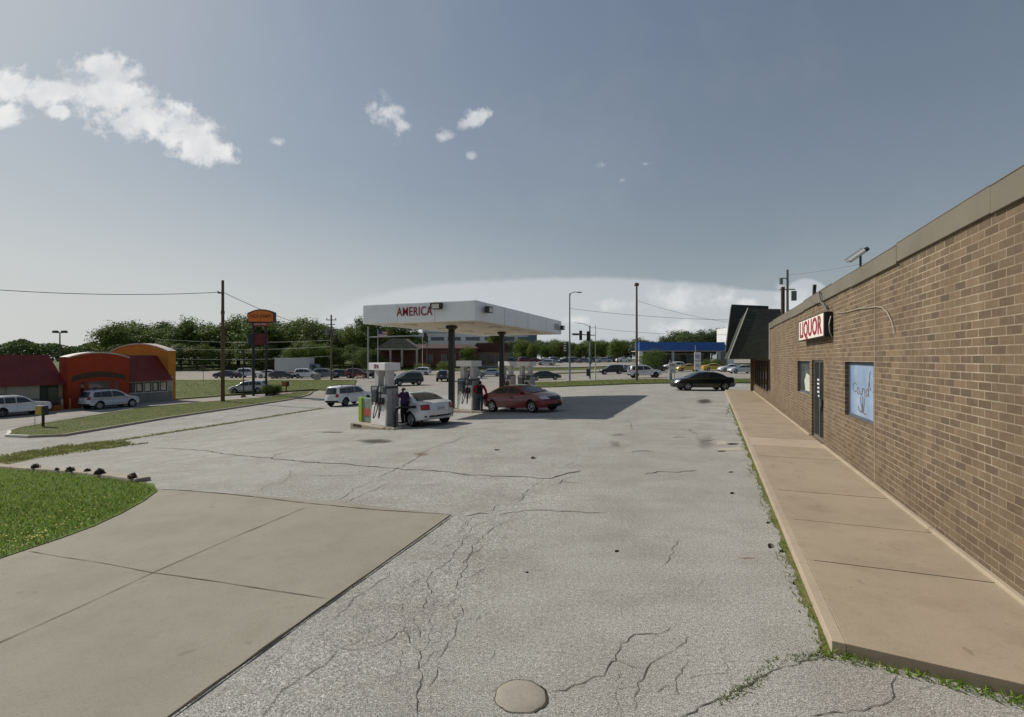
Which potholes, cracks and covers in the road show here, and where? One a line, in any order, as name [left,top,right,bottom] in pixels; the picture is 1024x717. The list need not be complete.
manhole cover [494,679,548,713]
crack [549,629,822,716]
crack [815,675,897,715]
crack [153,438,603,715]
